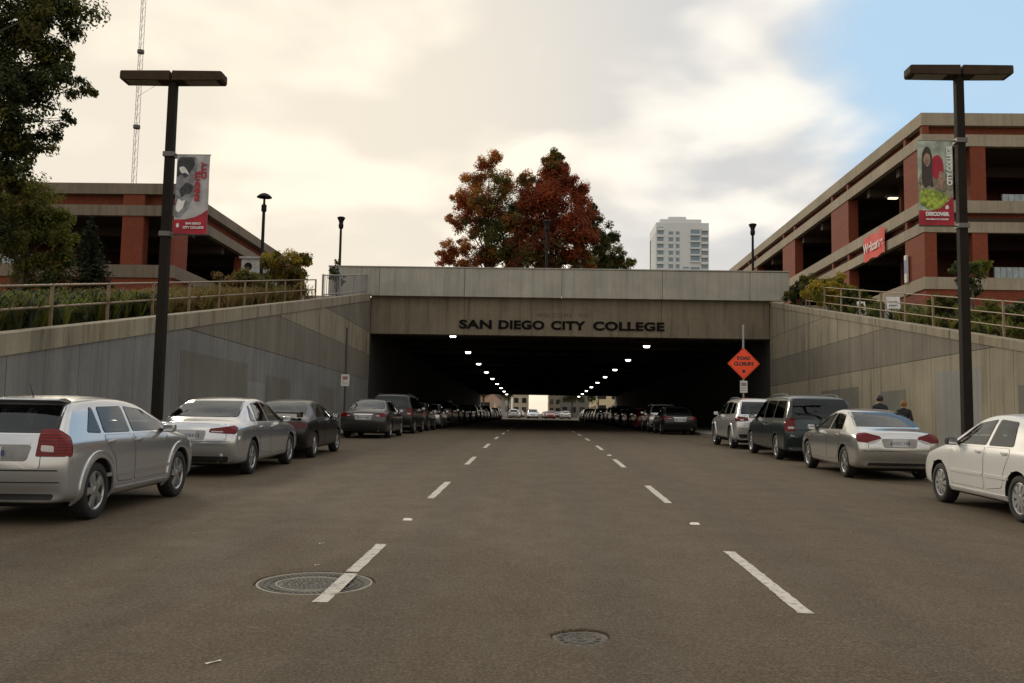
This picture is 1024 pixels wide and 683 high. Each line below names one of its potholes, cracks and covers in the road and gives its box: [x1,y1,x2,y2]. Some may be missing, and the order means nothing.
manhole cover [254,572,375,595]
manhole cover [551,631,609,647]
